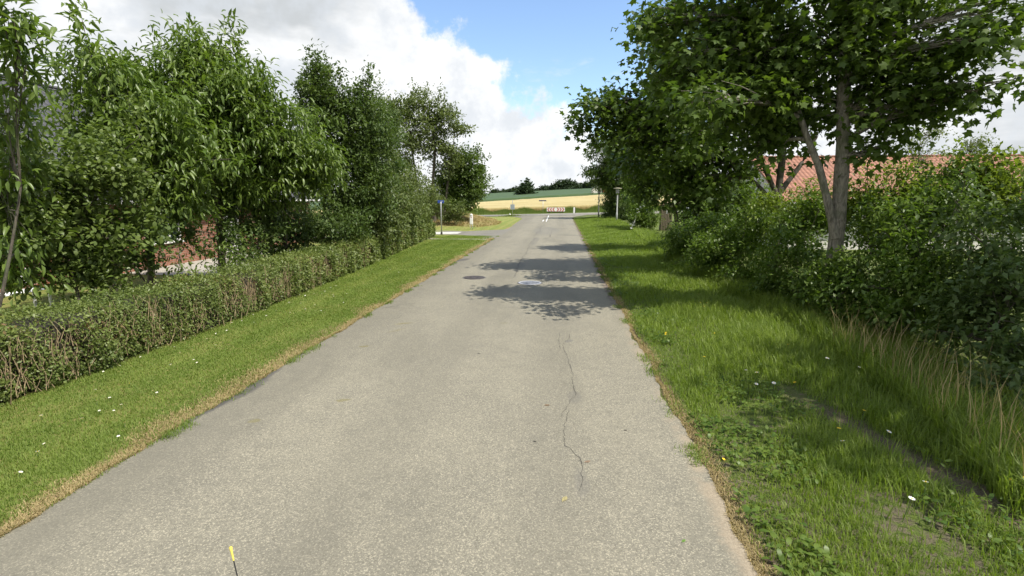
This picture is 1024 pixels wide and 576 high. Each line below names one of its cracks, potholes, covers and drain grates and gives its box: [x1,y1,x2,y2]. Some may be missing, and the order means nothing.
crack [558,333,583,491]
